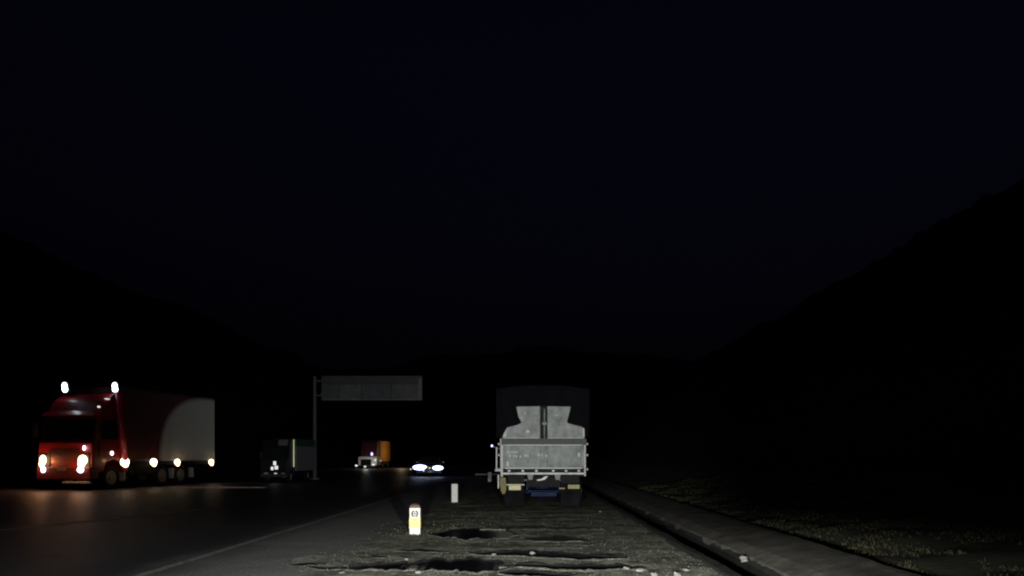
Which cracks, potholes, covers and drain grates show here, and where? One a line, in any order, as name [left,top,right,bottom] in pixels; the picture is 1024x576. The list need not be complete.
pothole [468,549,628,561]
pothole [427,527,518,541]
pothole [288,554,330,566]
crack [371,549,450,558]
pothole [330,557,515,575]
crack [480,517,604,531]
